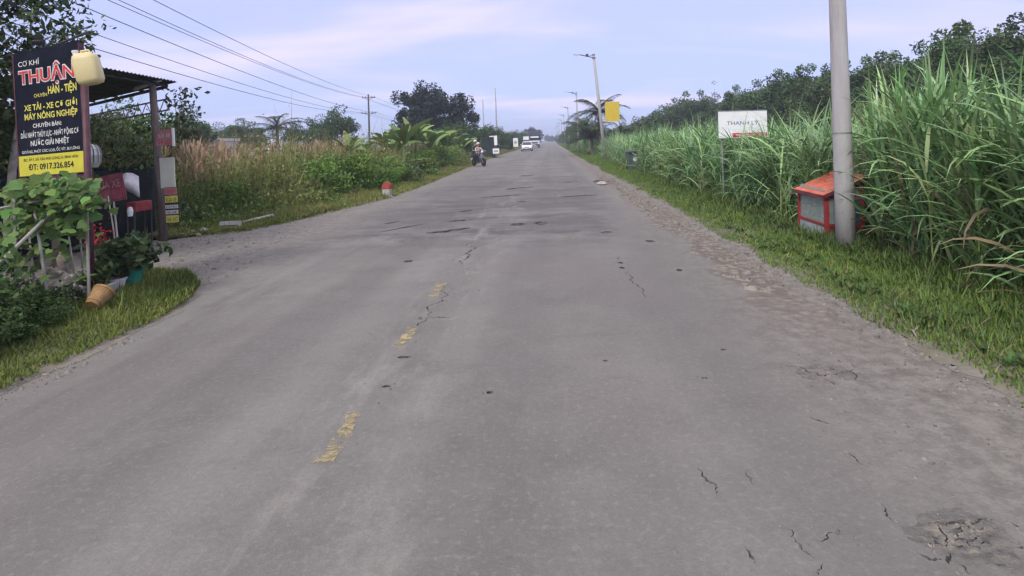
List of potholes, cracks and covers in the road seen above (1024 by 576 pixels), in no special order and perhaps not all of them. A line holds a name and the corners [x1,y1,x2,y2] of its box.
crack [785,528,838,575]
crack [698,469,718,494]
crack [416,285,453,326]
crack [884,507,1024,575]
